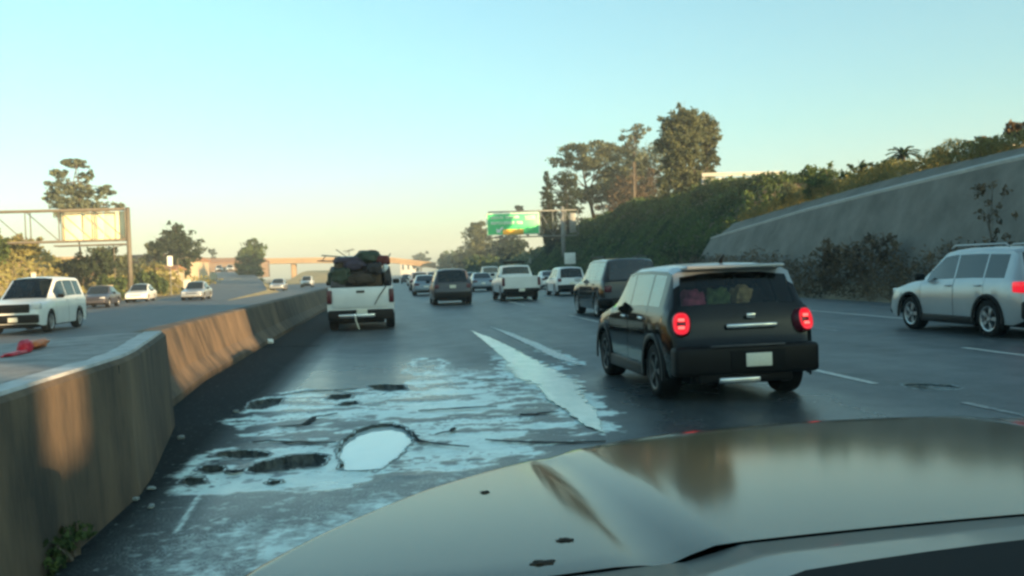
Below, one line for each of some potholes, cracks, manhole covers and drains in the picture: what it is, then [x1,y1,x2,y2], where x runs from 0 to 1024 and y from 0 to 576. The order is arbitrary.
pothole [366,384,409,392]
pothole [175,475,211,487]
pothole [243,452,333,474]
crack [412,406,606,447]
pothole [192,464,229,474]
pothole [333,422,420,471]
pothole [245,398,285,410]
pothole [324,393,355,401]
